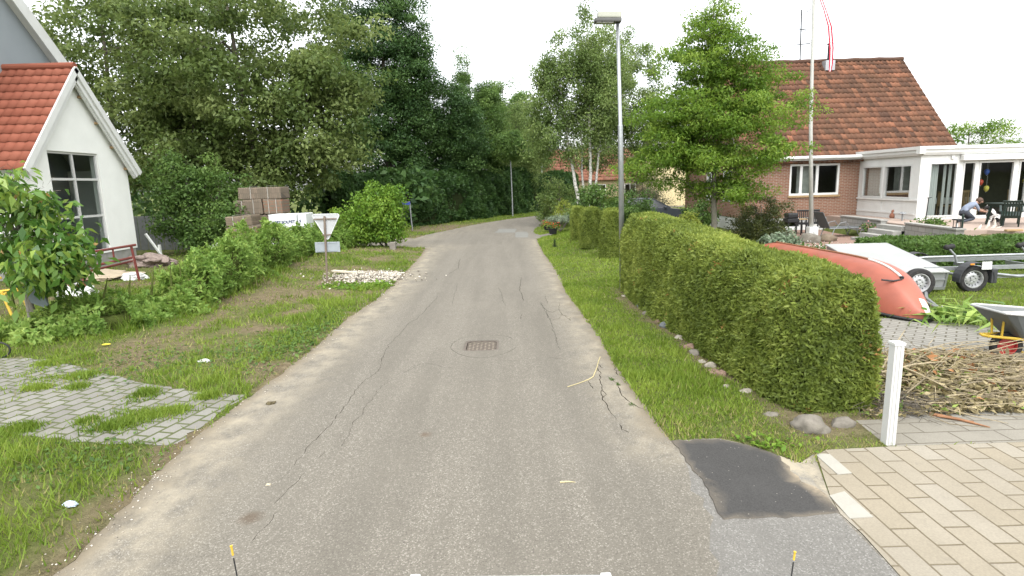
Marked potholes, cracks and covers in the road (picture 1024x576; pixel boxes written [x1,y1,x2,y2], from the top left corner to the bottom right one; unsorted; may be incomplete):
crack [252,296,454,541]
crack [588,366,643,432]
